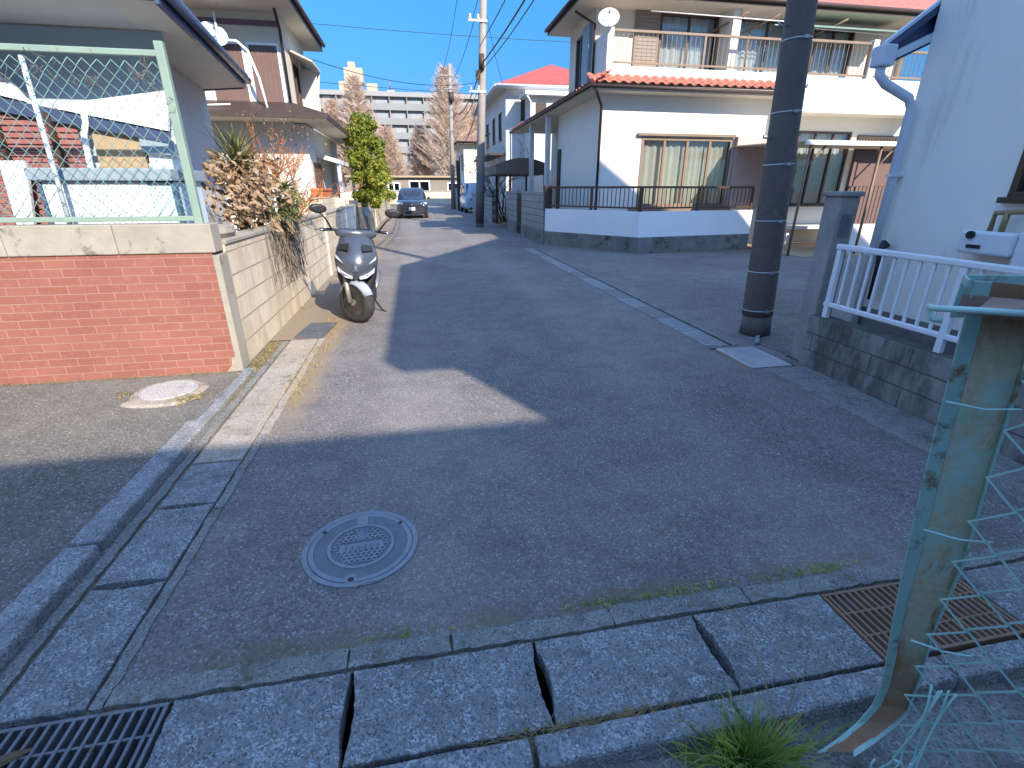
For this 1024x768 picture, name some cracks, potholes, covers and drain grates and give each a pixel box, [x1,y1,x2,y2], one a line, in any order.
drain grate [820,579,1024,666]
manhole cover [301,511,418,588]
manhole cover [120,379,209,408]
drain grate [0,702,172,768]
